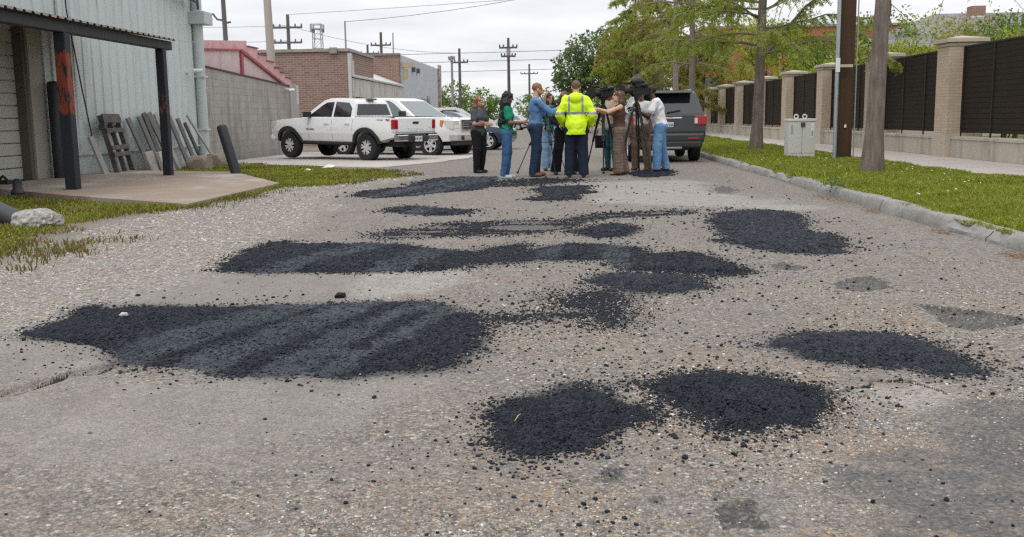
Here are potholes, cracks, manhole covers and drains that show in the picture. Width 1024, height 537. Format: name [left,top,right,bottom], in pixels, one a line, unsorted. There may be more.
crack [0,358,133,402]
